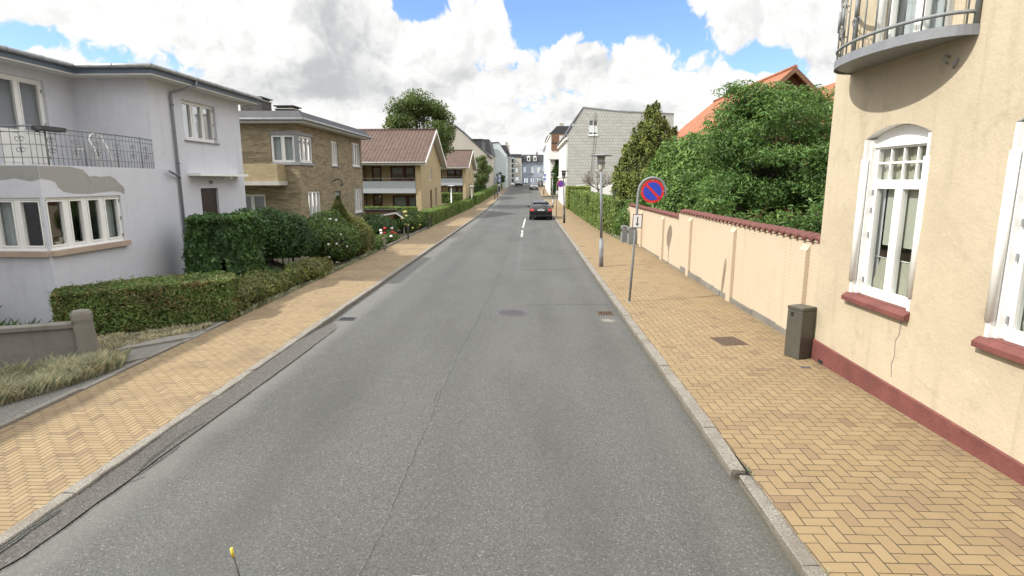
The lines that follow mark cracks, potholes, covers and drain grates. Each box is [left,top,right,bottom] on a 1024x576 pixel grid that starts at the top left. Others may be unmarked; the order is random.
manhole cover [709,336,749,346]
crack [357,223,517,576]
manhole cover [493,309,529,317]
